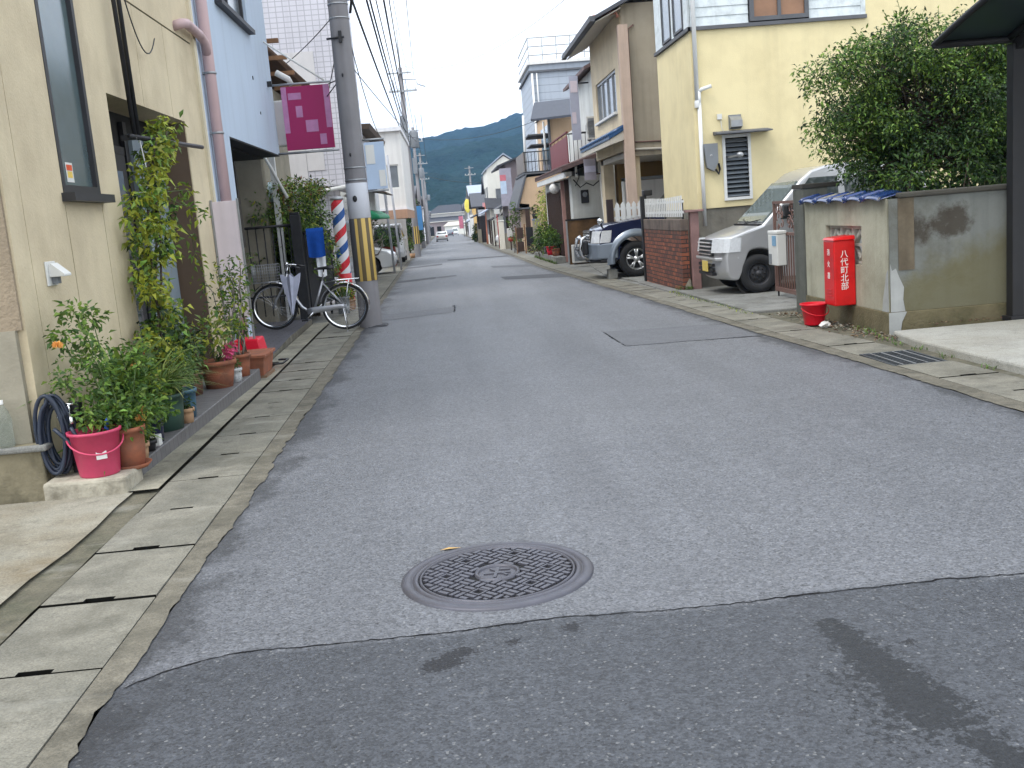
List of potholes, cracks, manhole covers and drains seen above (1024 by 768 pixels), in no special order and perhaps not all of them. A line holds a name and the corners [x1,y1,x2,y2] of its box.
drain grate [859,350,947,366]
manhole cover [401,541,594,612]
